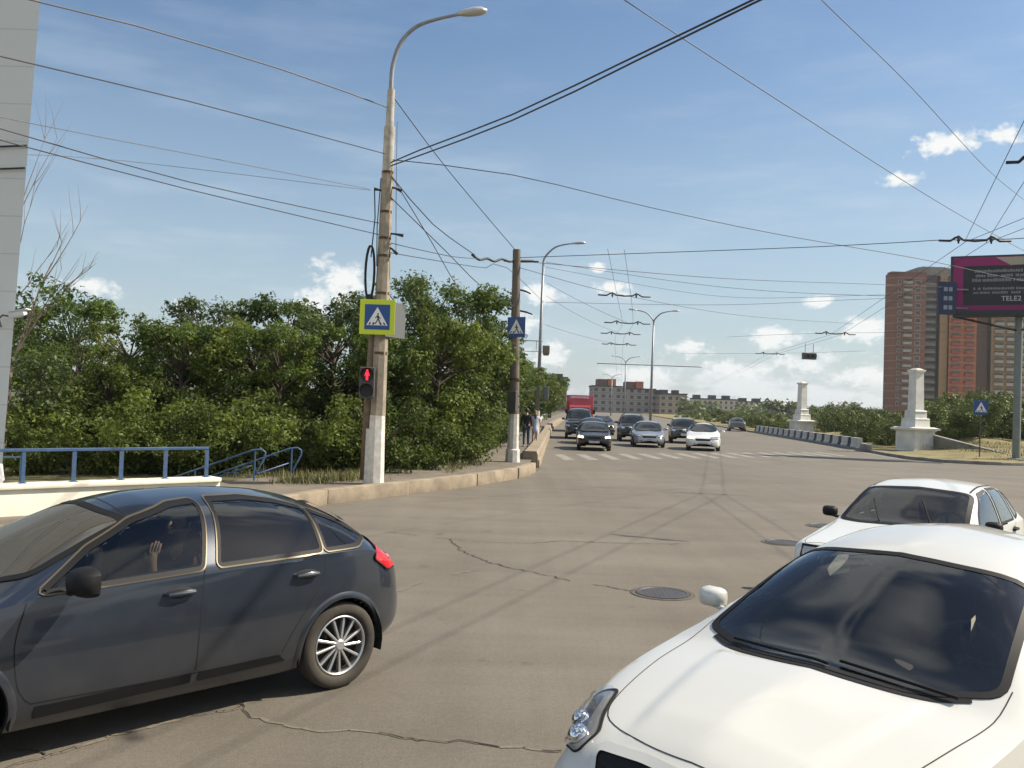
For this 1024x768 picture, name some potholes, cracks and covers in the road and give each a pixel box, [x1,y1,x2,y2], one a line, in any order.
crack [386,531,687,592]
manhole cover [630,586,696,601]
crack [5,700,562,768]
